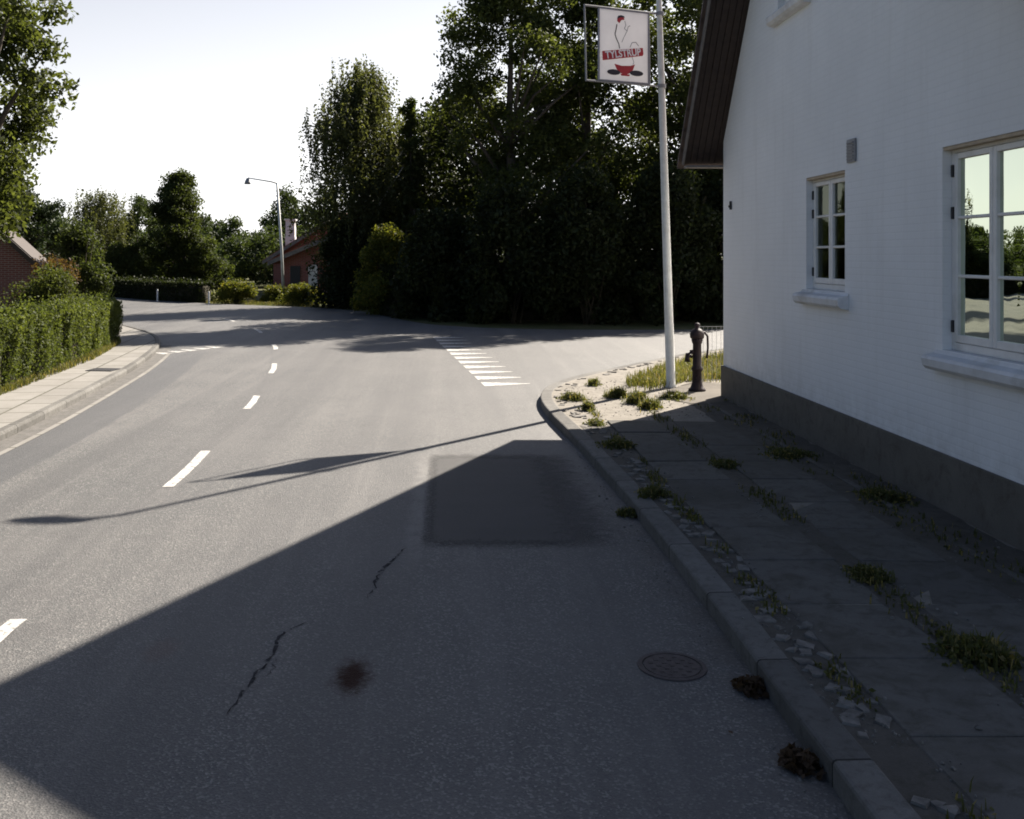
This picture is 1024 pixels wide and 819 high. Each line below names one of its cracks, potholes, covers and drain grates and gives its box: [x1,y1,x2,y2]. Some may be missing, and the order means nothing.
crack [367,548,406,598]
crack [227,621,308,714]
manhole cover [637,652,707,681]
